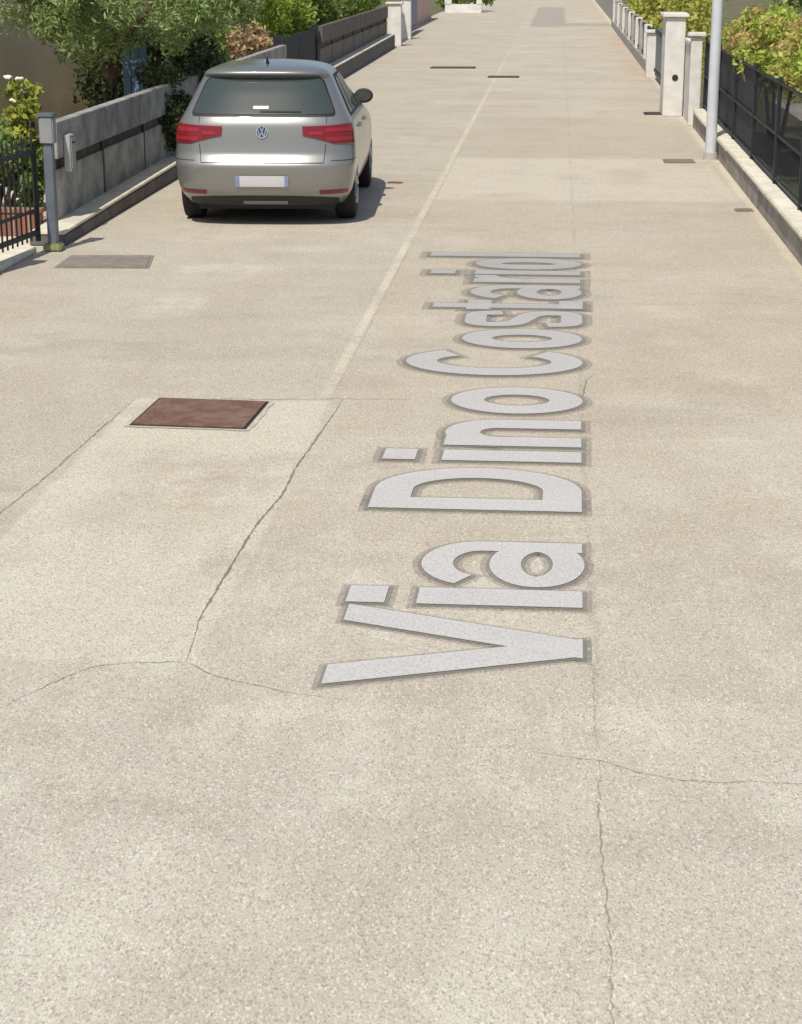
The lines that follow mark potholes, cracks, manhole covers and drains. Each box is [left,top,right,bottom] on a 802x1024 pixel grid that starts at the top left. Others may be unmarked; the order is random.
crack [540,752,800,784]
manhole cover [54,255,154,269]
crack [592,677,614,1024]
crack [0,397,399,513]
crack [1,661,330,707]
manhole cover [124,397,274,431]
